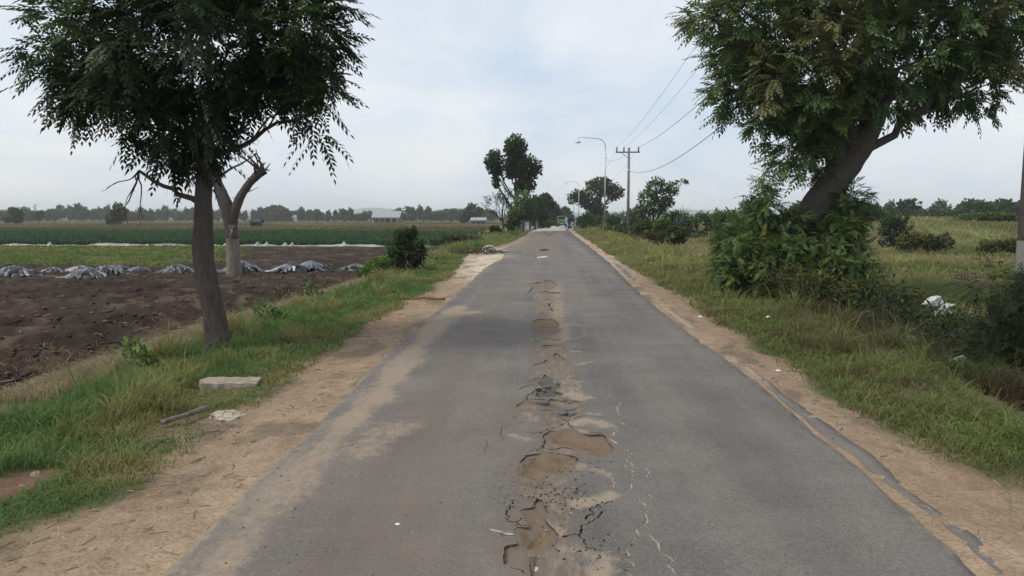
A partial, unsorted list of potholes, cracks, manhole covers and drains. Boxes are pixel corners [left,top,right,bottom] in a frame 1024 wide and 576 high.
pothole [516,452,579,487]
pothole [531,319,560,334]
pothole [516,398,585,418]
pothole [535,374,563,398]
pothole [544,430,613,456]
crack [480,360,675,576]
